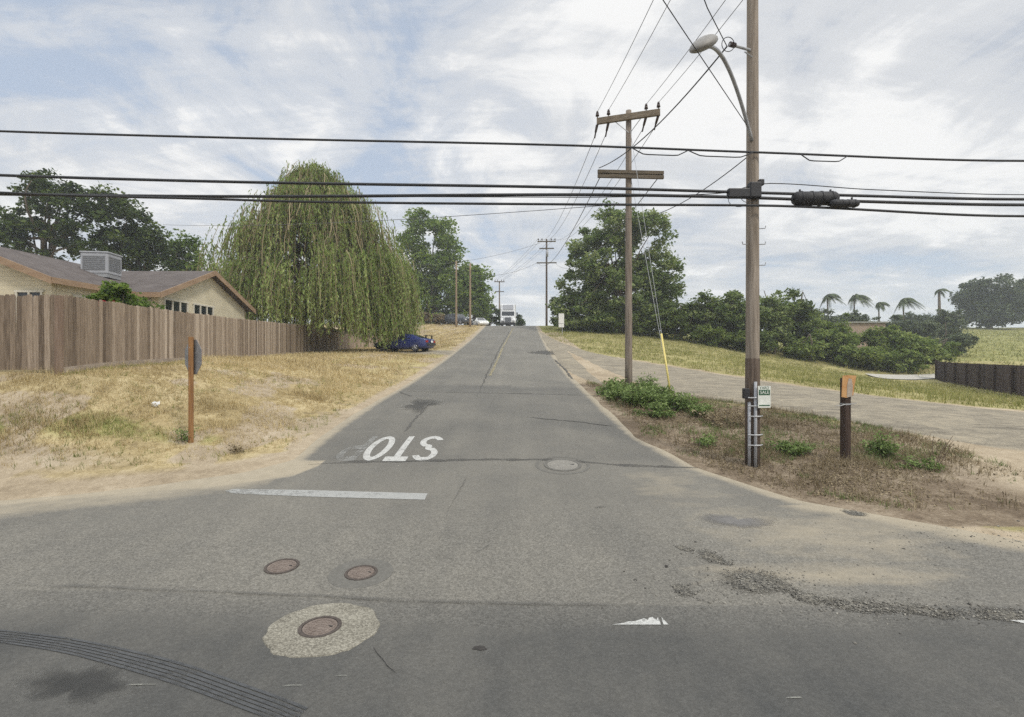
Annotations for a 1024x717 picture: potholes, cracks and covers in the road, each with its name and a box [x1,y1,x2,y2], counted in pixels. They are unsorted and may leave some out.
manhole cover [535,456,590,474]
manhole cover [264,558,300,574]
pothole [786,589,826,605]
pothole [672,584,694,596]
pothole [899,603,960,620]
pothole [975,606,1024,624]
pothole [721,568,798,594]
pothole [821,597,899,614]
crack [399,360,573,431]
pothole [698,551,735,565]
